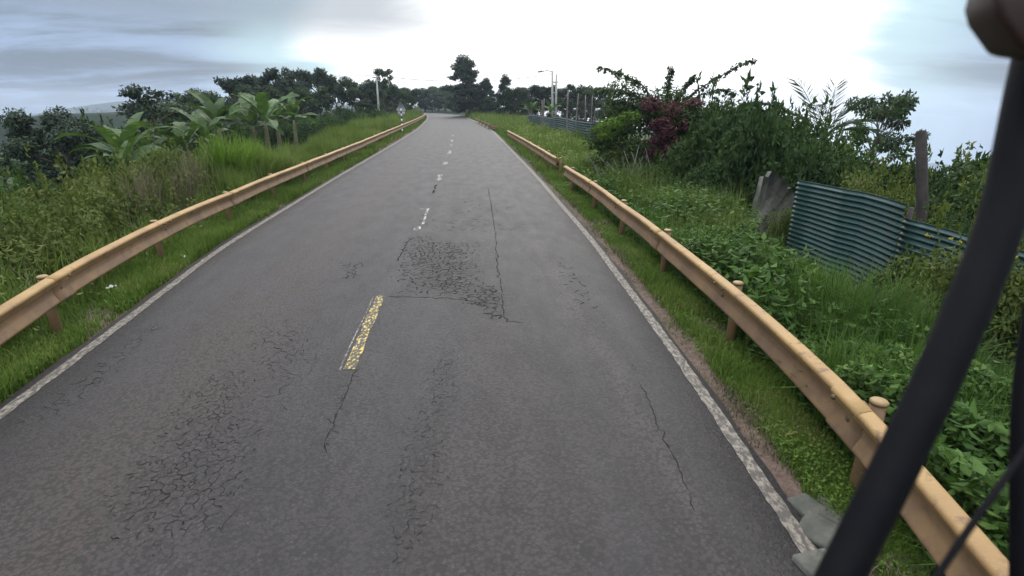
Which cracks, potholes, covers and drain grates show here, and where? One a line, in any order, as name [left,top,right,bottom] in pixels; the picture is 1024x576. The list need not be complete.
crack [324,368,361,453]
crack [105,371,262,557]
crack [388,189,522,322]
